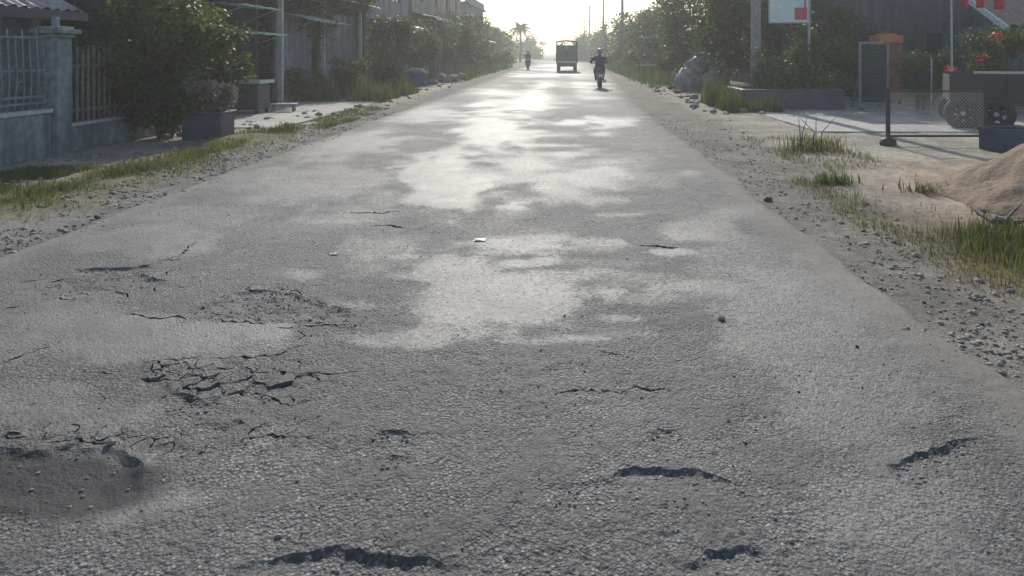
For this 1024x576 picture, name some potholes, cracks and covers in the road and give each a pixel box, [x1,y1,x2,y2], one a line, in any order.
crack [345,211,402,228]
crack [557,385,670,394]
crack [19,241,197,320]
pothole [0,443,147,528]
crack [5,287,368,456]
